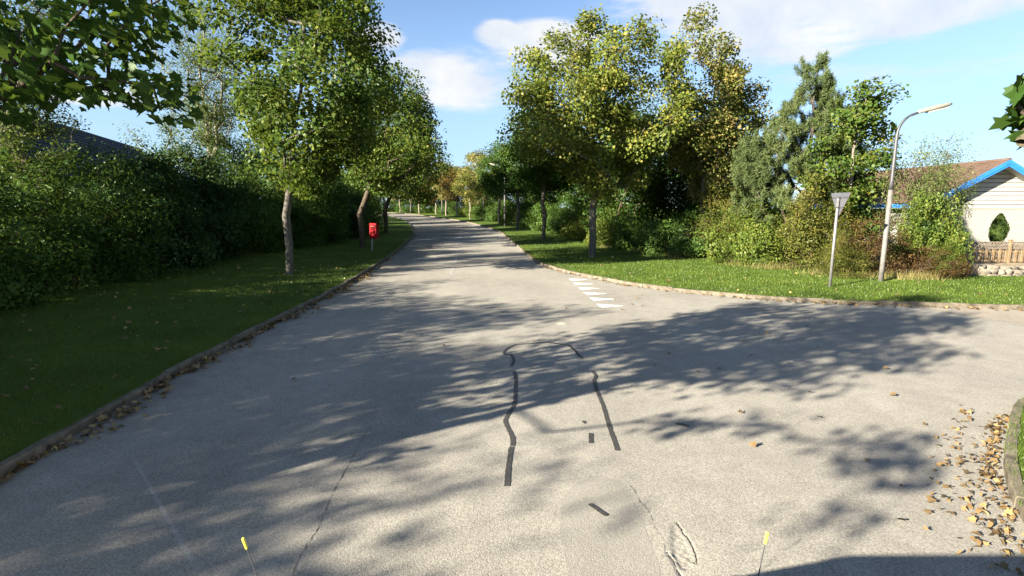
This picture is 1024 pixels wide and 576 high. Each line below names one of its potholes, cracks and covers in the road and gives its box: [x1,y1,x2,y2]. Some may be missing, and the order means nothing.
crack [627,482,697,576]
crack [292,418,375,574]
